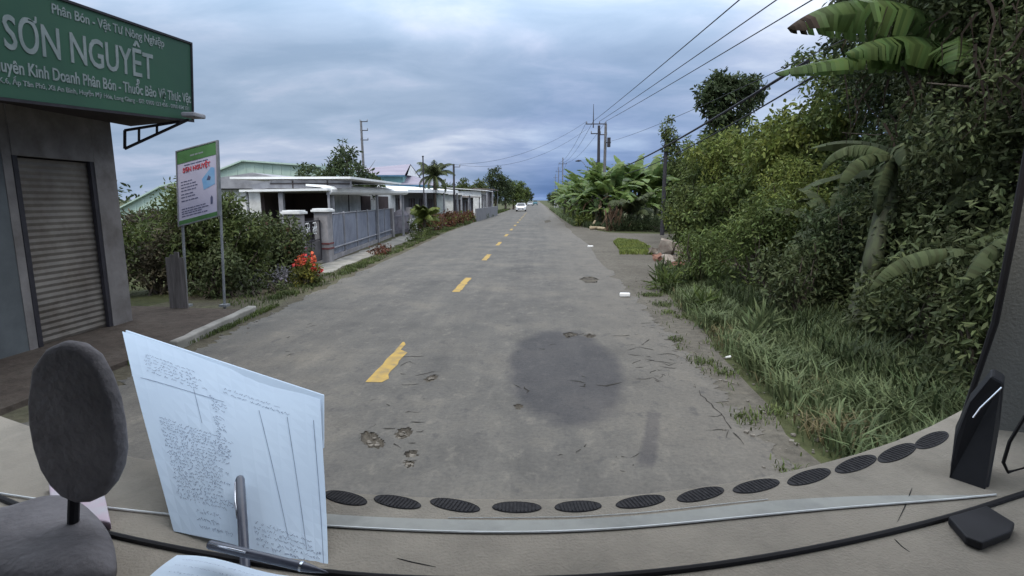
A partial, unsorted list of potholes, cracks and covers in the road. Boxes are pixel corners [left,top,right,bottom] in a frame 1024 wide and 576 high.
pothole [394,427,413,439]
pothole [403,450,419,461]
crack [373,356,437,448]
pothole [358,431,385,449]
crack [699,390,744,444]
